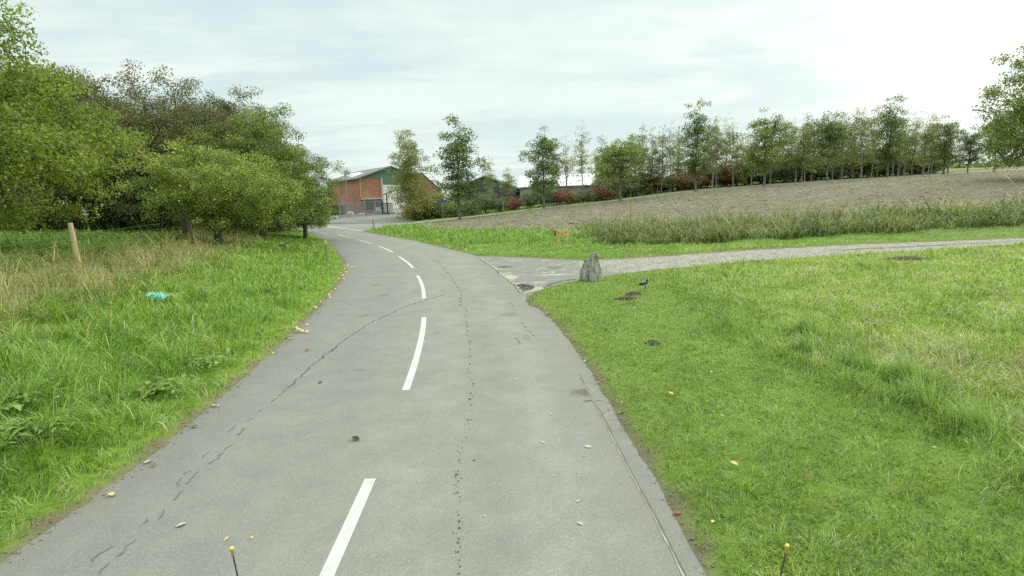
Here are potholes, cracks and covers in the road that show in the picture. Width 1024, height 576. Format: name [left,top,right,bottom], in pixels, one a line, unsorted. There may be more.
crack [92,298,431,572]
